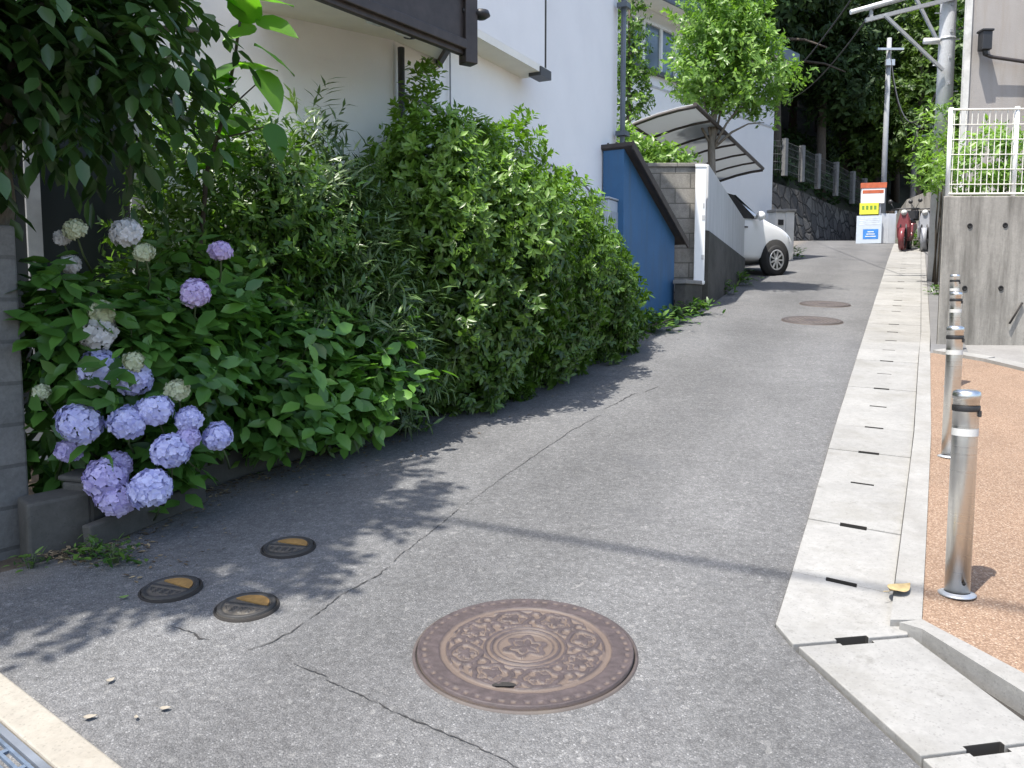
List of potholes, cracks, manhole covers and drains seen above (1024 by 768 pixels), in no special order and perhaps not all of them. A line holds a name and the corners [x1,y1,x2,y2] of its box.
manhole cover [412,599,639,715]
drain grate [0,723,52,768]
manhole cover [781,316,844,325]
utility cover [138,575,204,603]
crack [294,663,519,768]
utility cover [213,592,280,623]
utility cover [260,536,316,559]
